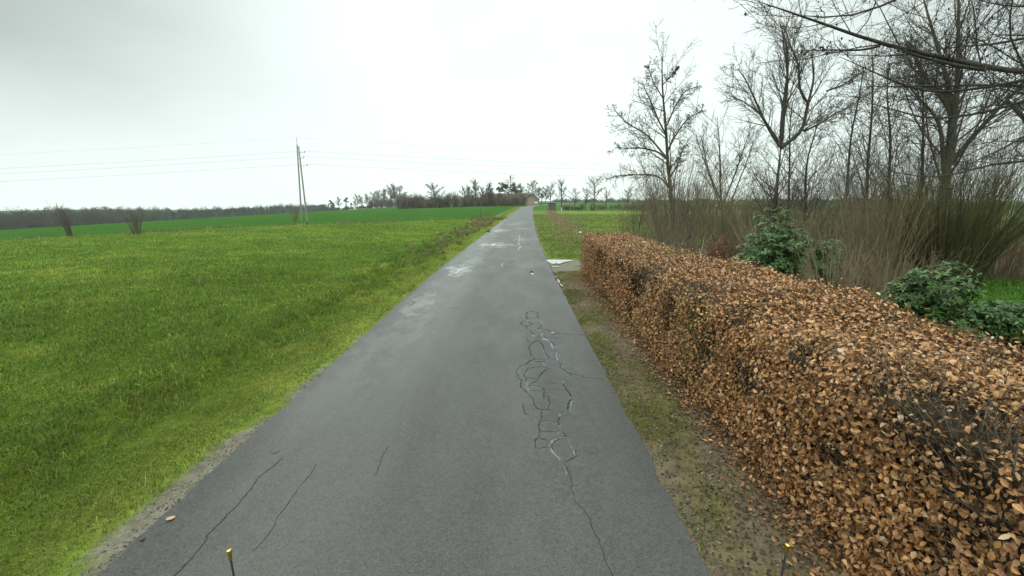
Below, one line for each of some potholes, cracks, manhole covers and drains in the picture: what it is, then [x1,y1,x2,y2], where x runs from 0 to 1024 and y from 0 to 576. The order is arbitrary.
crack [174,451,317,576]
crack [516,311,613,576]
